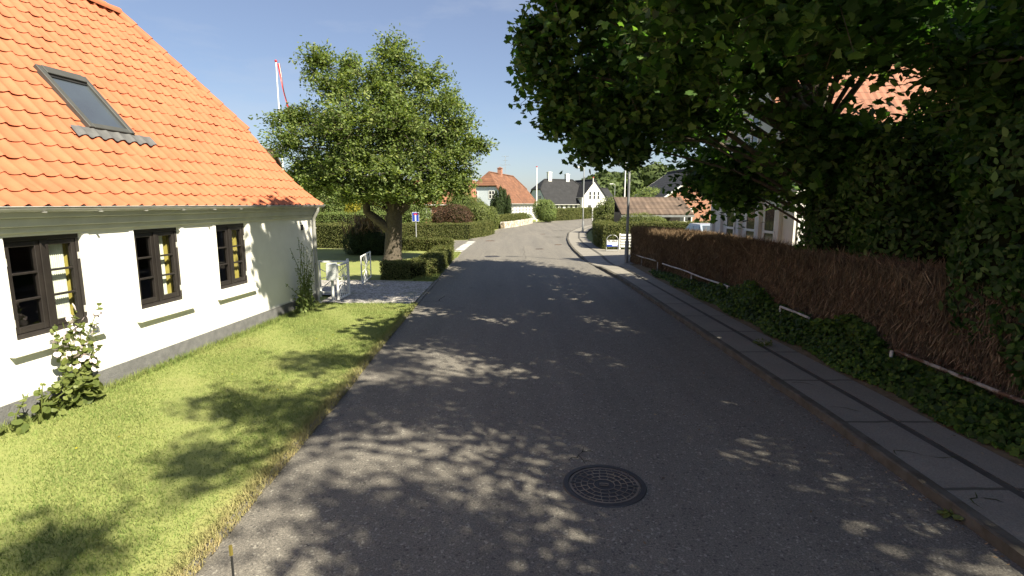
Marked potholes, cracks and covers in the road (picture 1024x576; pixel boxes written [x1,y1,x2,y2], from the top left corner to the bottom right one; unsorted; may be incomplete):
manhole cover [563,464,647,508]
